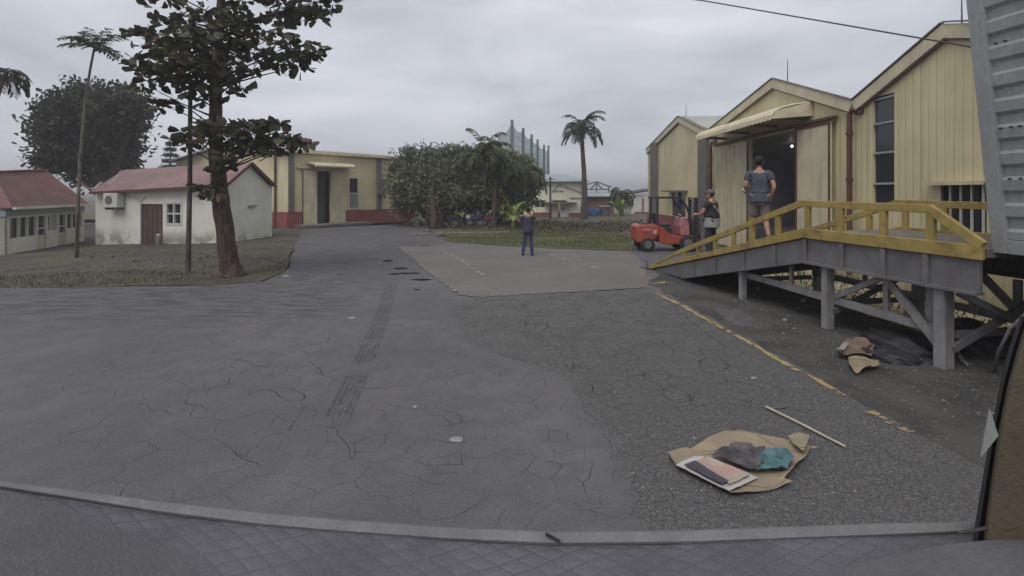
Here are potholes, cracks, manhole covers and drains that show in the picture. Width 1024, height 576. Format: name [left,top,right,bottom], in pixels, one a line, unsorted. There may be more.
crack [59,296,927,527]
